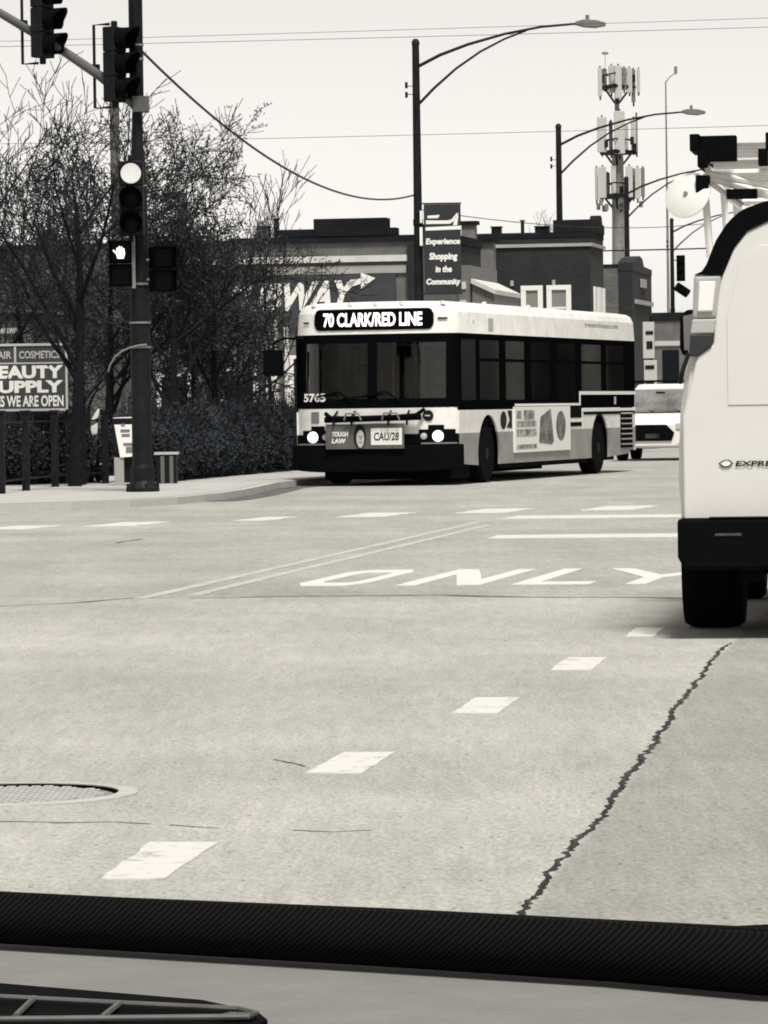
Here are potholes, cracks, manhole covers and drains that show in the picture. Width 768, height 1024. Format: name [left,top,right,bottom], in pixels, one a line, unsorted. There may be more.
crack [515,643,730,915]
manhole cover [0,782,138,807]
